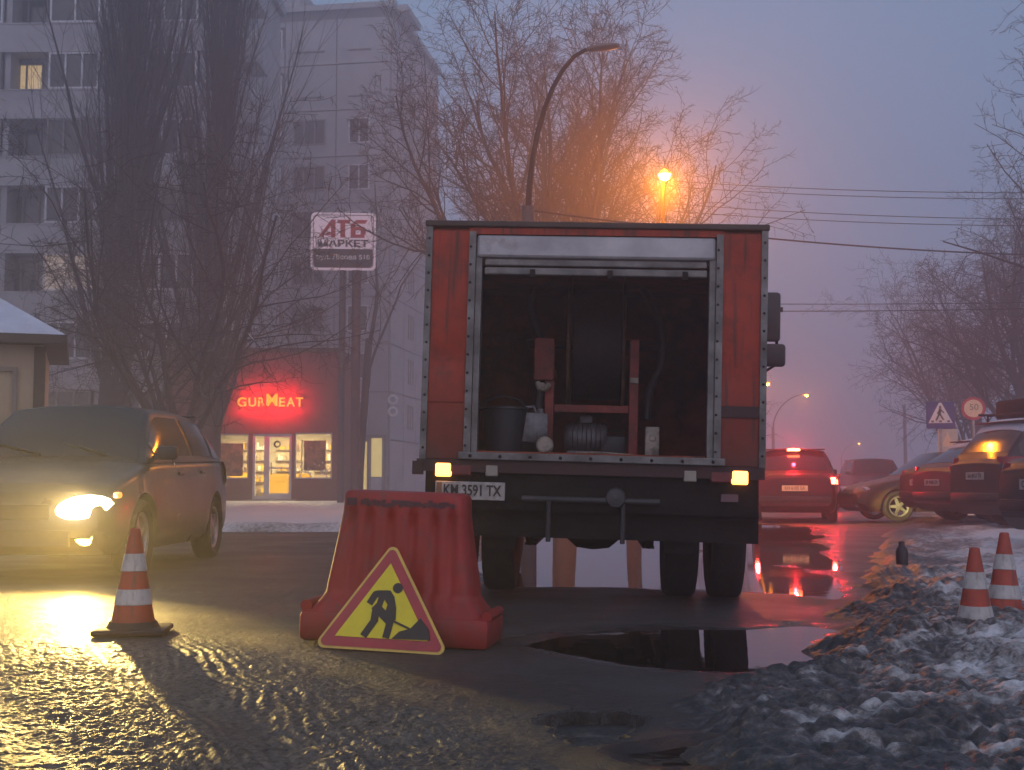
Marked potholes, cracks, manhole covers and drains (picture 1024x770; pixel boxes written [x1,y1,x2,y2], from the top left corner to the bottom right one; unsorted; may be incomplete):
pothole [529,708,653,746]
